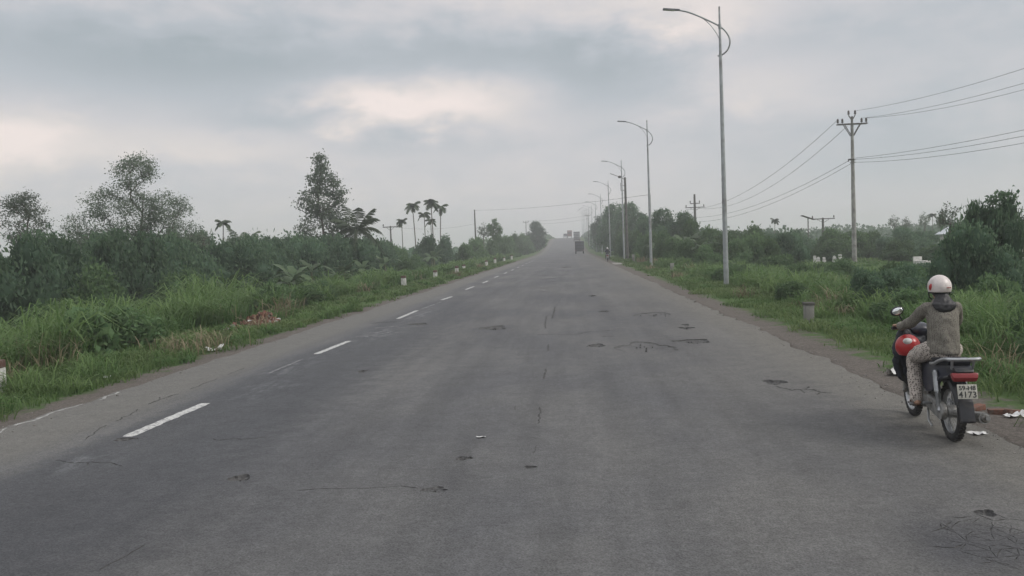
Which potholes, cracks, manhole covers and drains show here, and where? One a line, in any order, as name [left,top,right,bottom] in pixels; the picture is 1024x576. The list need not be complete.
crack [933,514,1024,570]
pothole [614,341,678,353]
crack [543,275,615,351]
